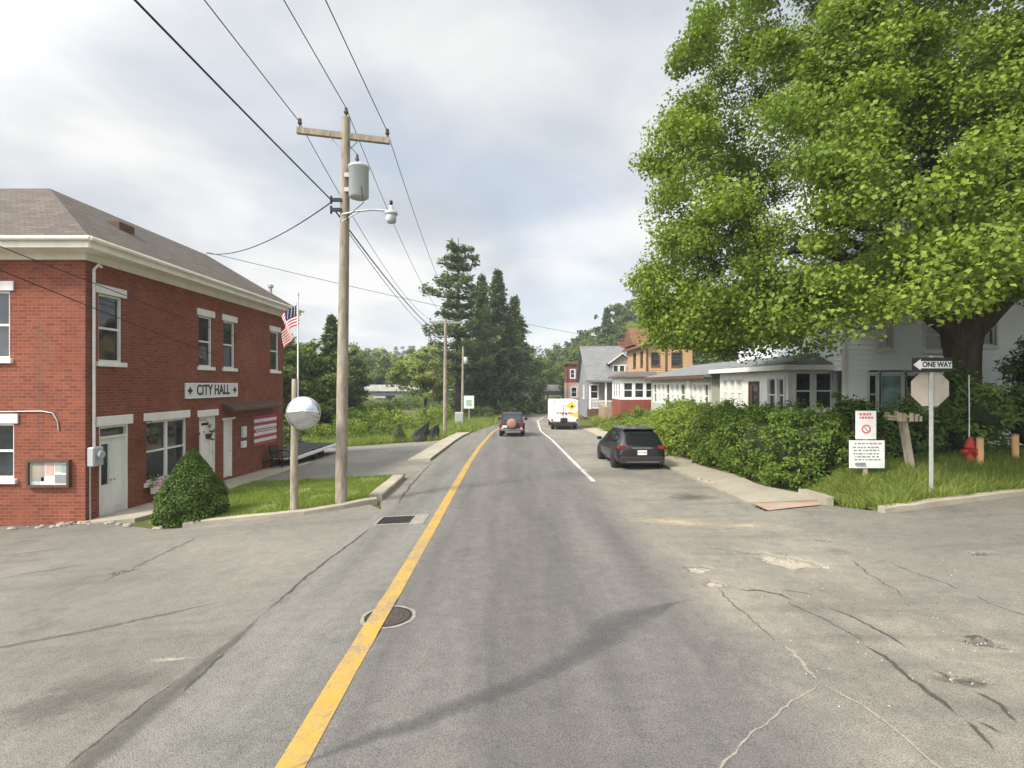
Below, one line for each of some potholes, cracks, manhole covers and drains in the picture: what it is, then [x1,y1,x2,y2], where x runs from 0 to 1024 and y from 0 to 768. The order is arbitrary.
crack [855,562,958,594]
drain grate [372,514,430,526]
manhole cover [359,605,416,629]
pothole [943,678,986,687]
crack [720,589,1015,768]
